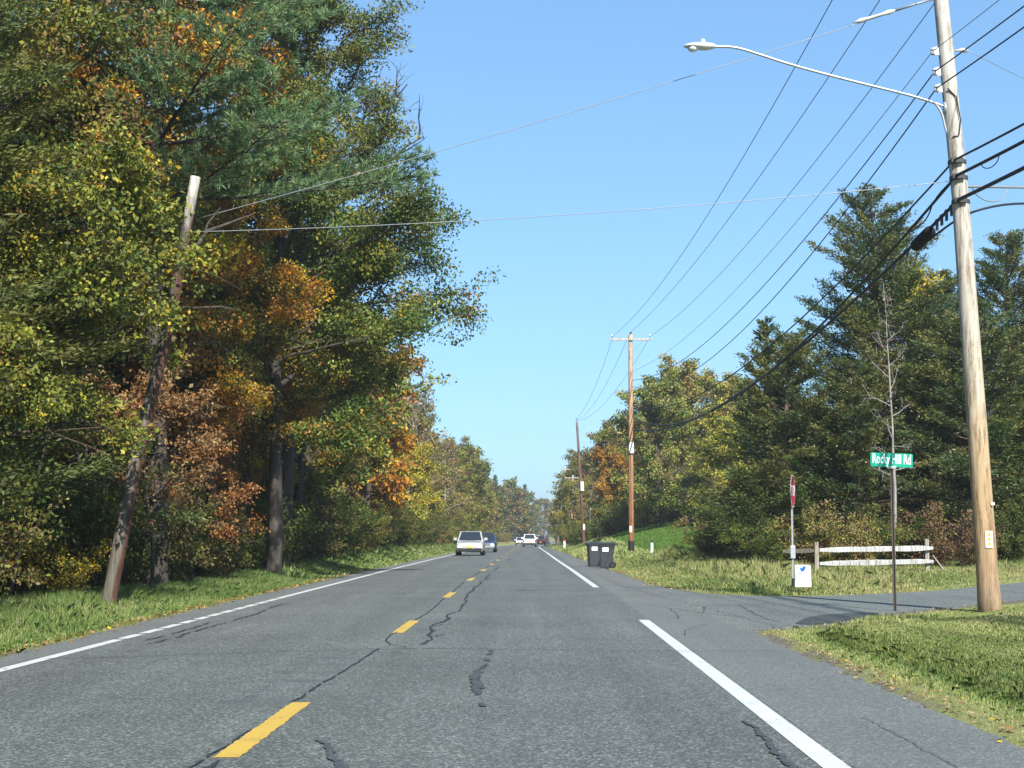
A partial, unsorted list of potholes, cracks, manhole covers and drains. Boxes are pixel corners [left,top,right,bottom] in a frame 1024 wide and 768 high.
crack [644,603,781,635]
crack [187,729,252,768]
crack [147,603,285,644]
crack [292,552,510,701]
crack [863,716,957,766]
